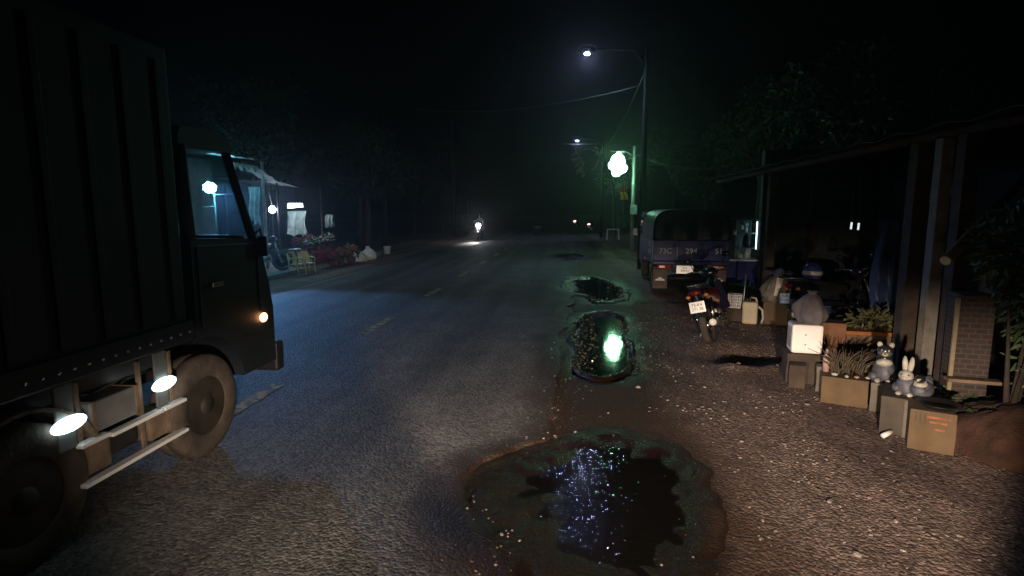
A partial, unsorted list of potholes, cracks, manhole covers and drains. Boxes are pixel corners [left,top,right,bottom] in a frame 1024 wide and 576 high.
pothole [559,275,632,305]
pothole [556,253,594,261]
pothole [465,428,729,576]
pothole [566,310,636,382]
